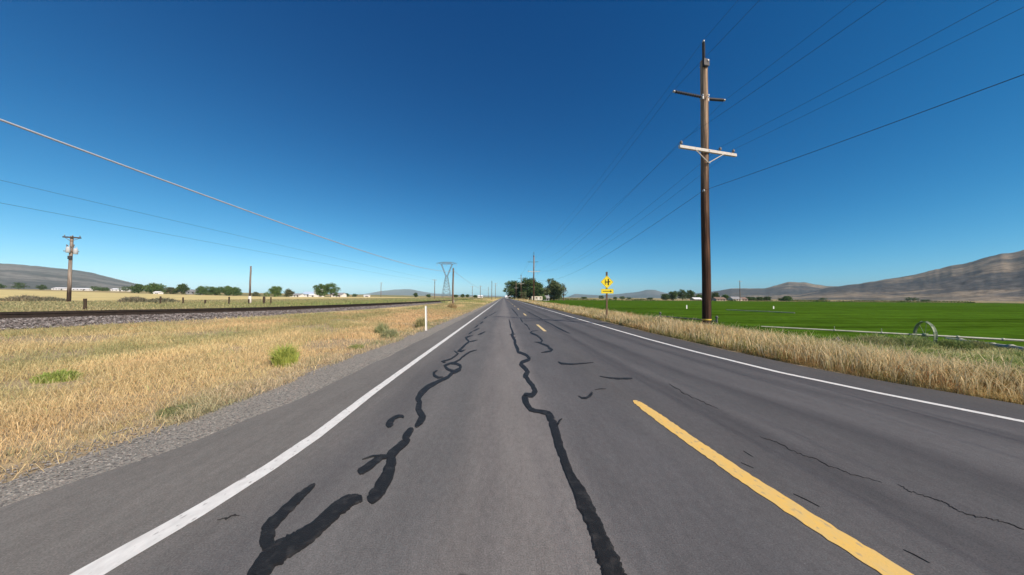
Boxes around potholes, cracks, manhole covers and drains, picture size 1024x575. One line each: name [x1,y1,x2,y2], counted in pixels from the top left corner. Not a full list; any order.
crack [898,484,1024,530]
crack [741,436,880,482]
